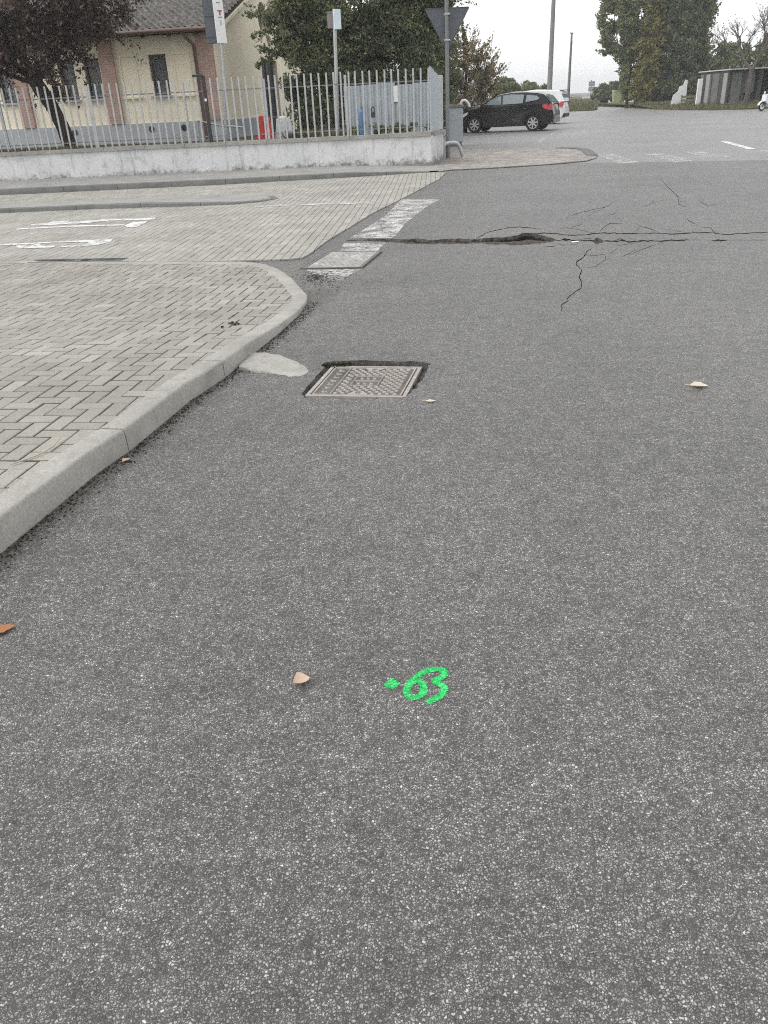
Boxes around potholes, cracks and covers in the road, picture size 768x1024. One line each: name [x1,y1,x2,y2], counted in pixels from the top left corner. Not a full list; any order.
crack [476,183,768,311]
manhole cover [302,360,431,400]
